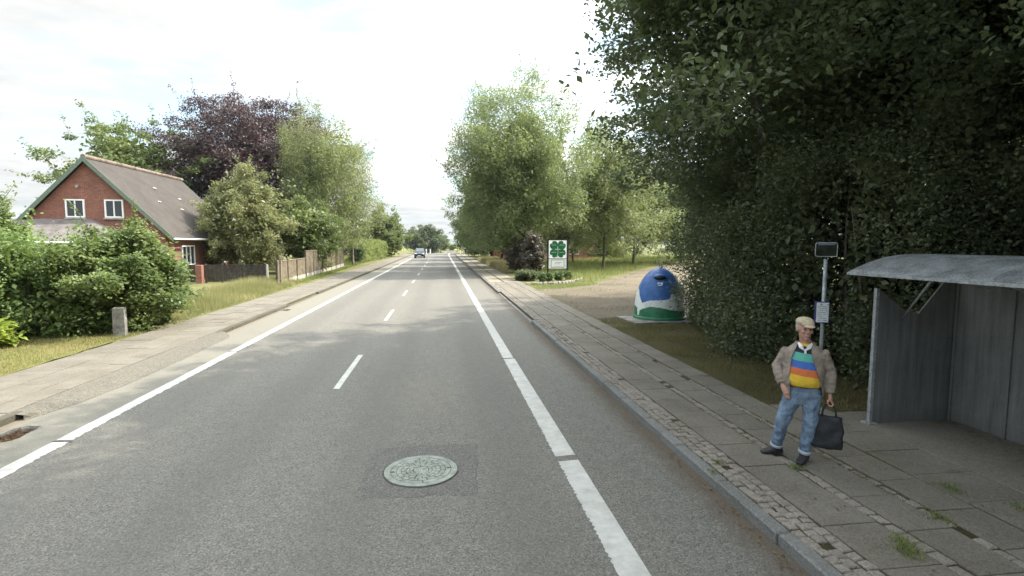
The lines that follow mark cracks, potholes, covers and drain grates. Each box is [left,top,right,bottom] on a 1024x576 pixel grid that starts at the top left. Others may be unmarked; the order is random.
manhole cover [382,455,459,488]
